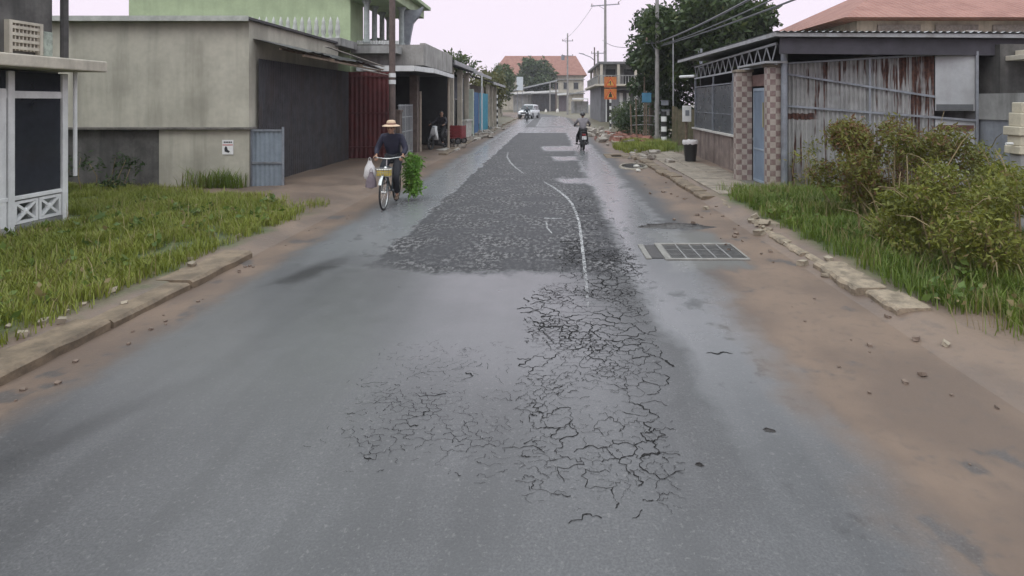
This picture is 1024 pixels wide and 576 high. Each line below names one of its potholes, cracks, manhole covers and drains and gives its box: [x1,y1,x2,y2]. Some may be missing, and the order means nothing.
crack [305,342,527,483]
crack [509,194,685,523]
drain grate [638,243,751,260]
